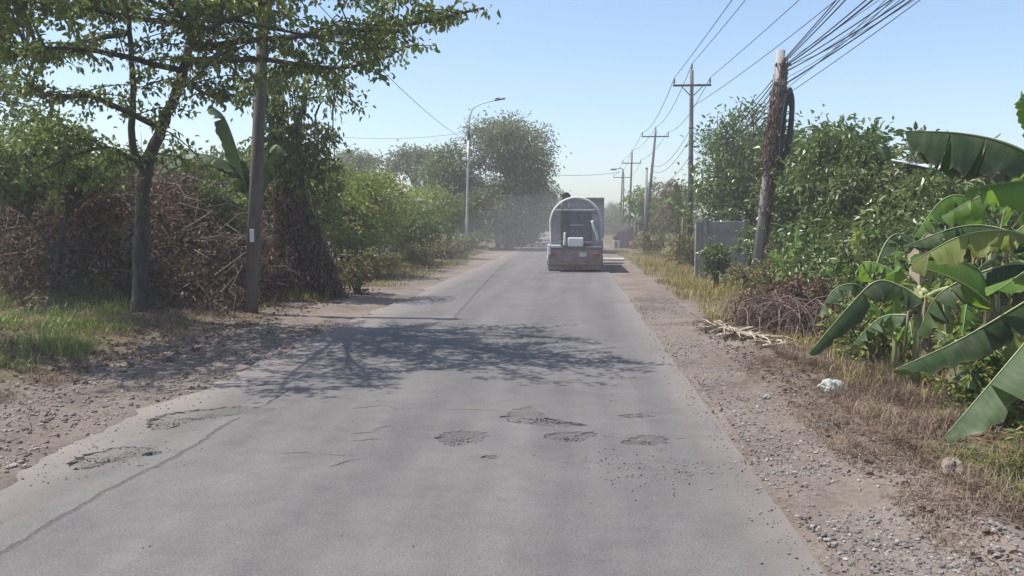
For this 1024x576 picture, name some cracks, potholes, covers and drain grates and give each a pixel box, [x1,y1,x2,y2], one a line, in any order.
pothole [66,446,155,470]
crack [280,405,403,467]
pothole [434,430,490,447]
pothole [544,431,598,443]
pothole [620,435,671,446]
pothole [145,406,277,430]
pothole [500,406,589,427]
